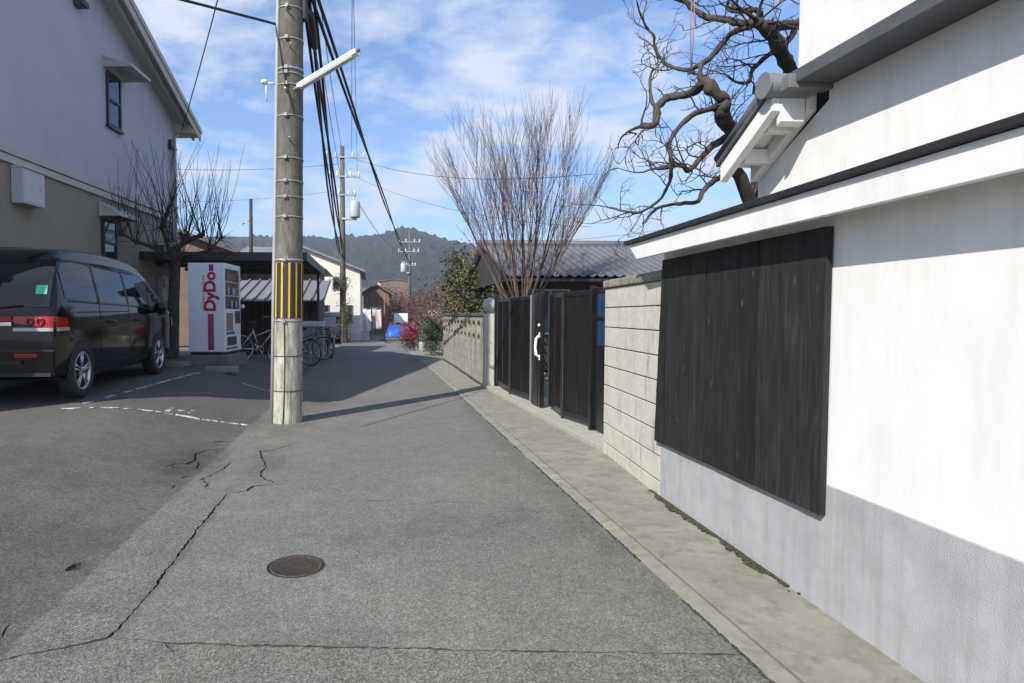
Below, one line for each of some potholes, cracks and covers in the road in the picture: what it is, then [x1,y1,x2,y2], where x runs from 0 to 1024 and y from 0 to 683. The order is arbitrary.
crack [0,441,739,661]
manhole cover [266,555,326,578]
pothole [65,562,88,571]
